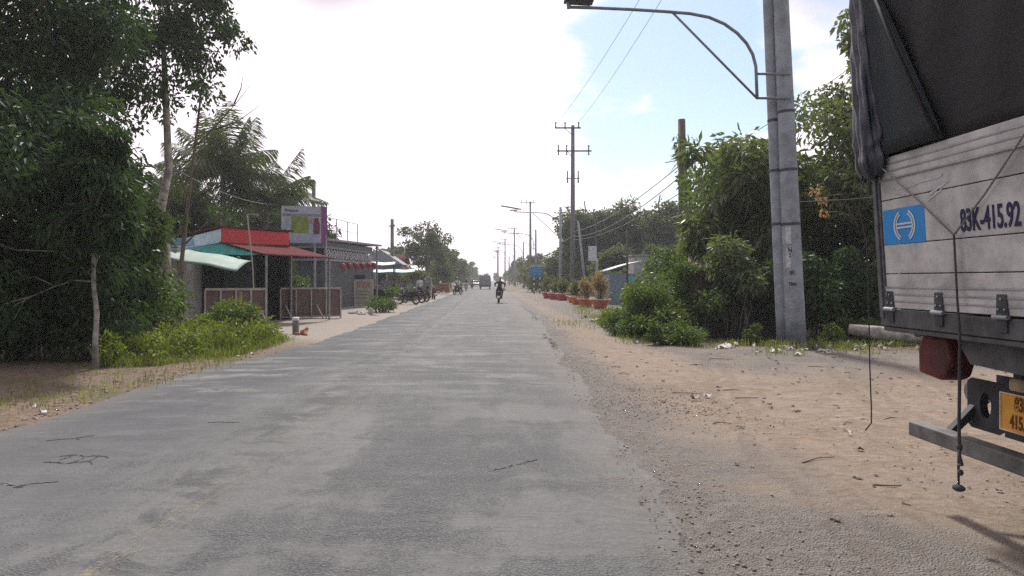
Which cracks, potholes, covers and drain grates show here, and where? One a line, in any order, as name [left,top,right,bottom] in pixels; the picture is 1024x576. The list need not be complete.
crack [43,435,109,464]
